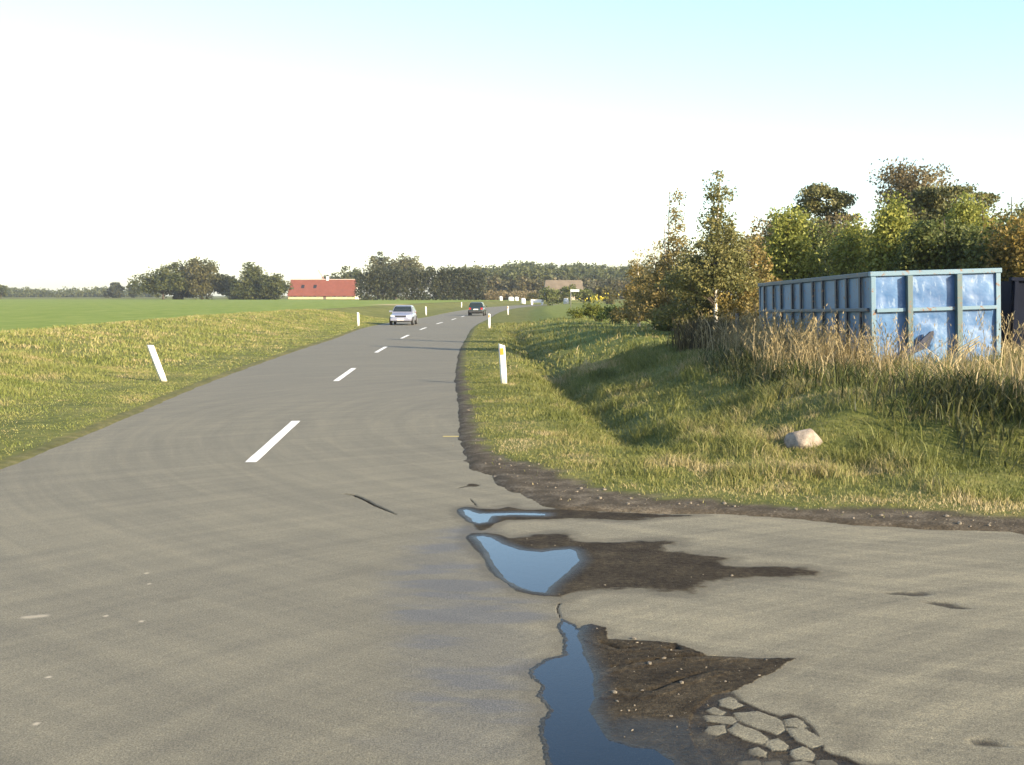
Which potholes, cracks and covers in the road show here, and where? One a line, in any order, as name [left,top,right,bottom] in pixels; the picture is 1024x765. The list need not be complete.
pothole [462,531,844,605]
crack [341,493,400,515]
crack [452,483,483,507]
pothole [527,618,801,765]
pothole [455,504,707,532]
